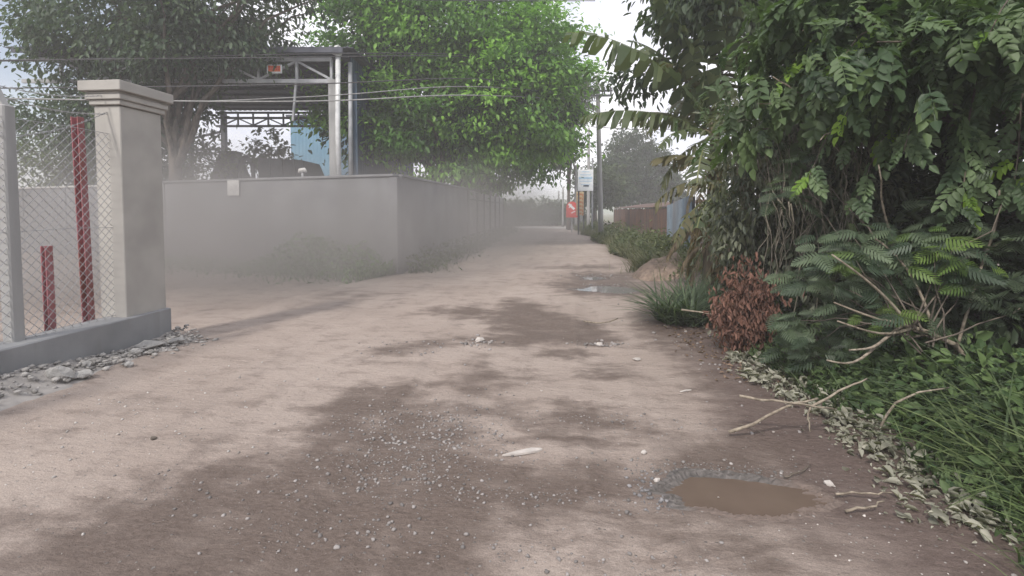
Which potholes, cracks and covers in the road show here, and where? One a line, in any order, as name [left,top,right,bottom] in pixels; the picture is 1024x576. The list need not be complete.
pothole [644,468,844,522]
pothole [567,285,650,295]
